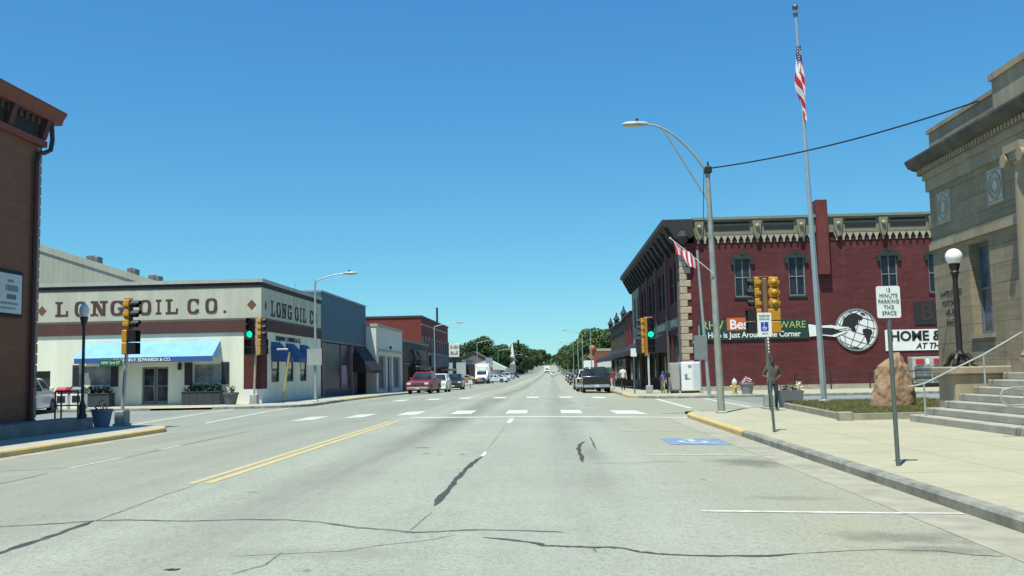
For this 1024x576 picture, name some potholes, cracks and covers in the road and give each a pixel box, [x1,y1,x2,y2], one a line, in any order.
crack [484,537,995,557]
crack [230,535,453,574]
crack [0,431,249,484]
